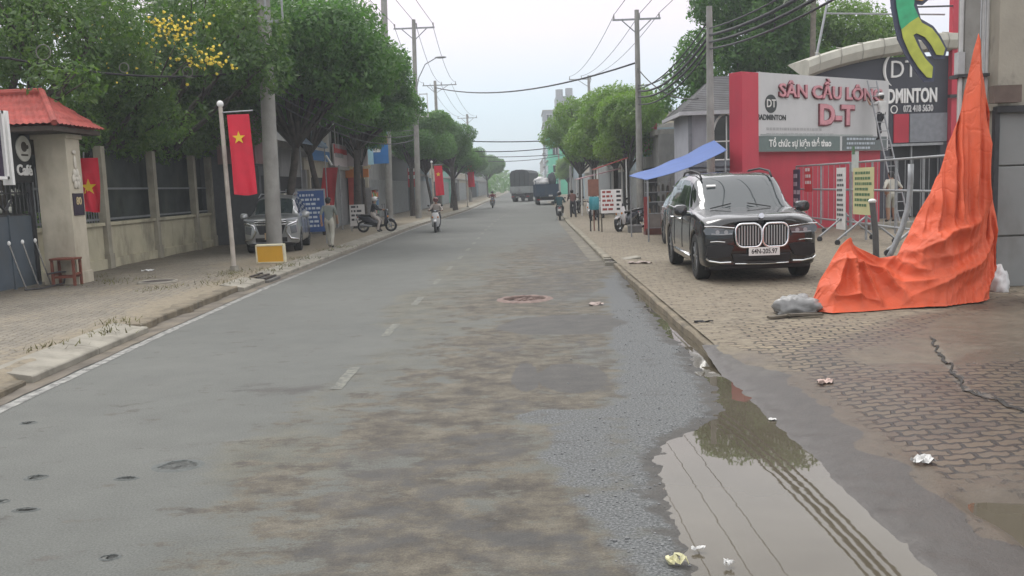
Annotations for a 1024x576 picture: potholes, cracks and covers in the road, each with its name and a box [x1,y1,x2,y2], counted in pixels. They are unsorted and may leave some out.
drain grate [250,272,281,283]
crack [930,337,1024,411]
manhole cover [497,295,553,303]
pothole [151,459,205,472]
